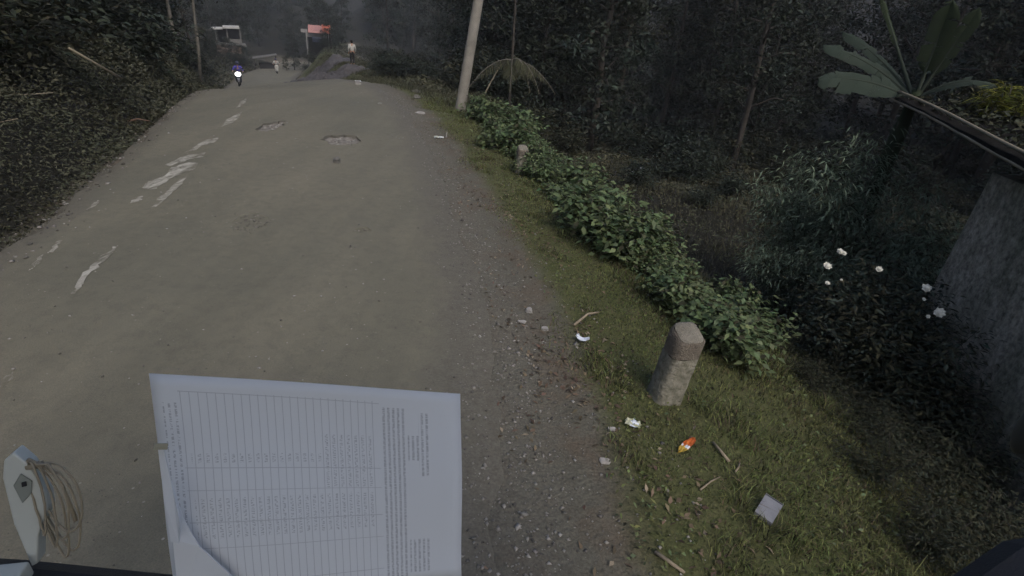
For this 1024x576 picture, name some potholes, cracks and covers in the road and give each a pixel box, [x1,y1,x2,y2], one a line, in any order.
pothole [320,135,361,145]
pothole [255,121,285,132]
